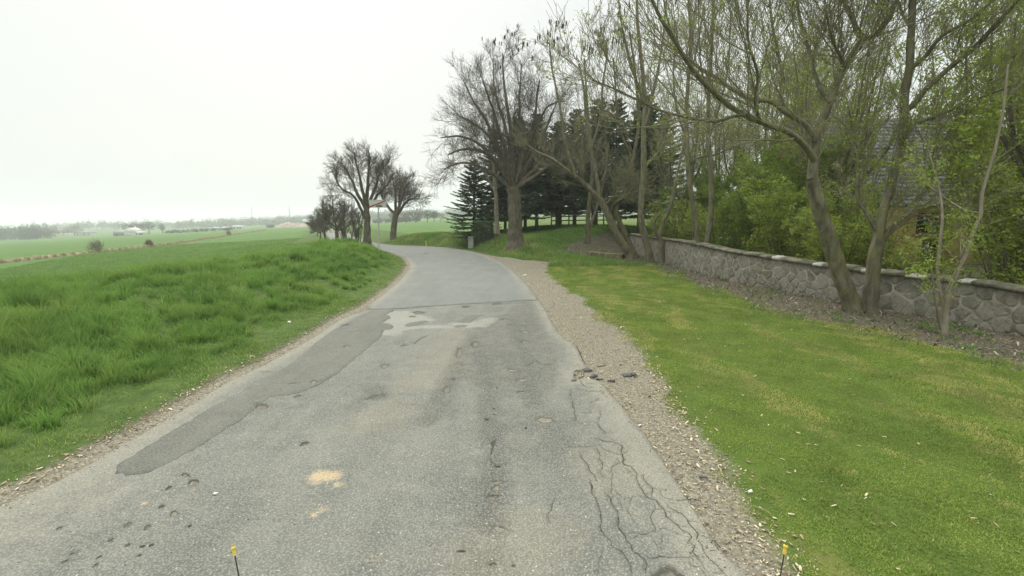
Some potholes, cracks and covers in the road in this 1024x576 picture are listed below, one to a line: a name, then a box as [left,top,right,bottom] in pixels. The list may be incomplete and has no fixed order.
crack [578,382,723,573]
